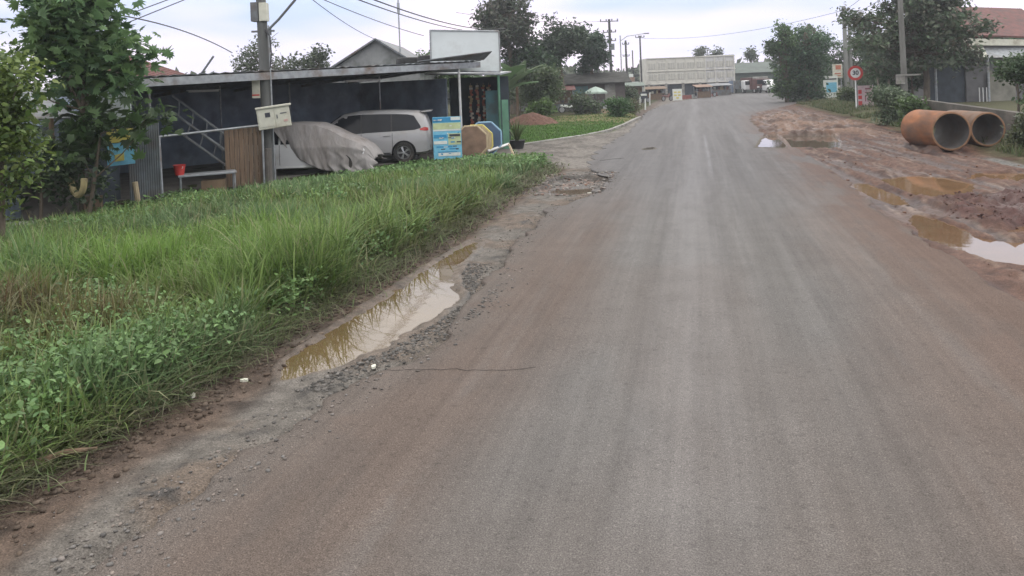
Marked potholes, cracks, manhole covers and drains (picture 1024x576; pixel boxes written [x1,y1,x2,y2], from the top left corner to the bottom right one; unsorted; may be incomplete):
pothole [529,174,613,196]
pothole [269,238,489,387]
